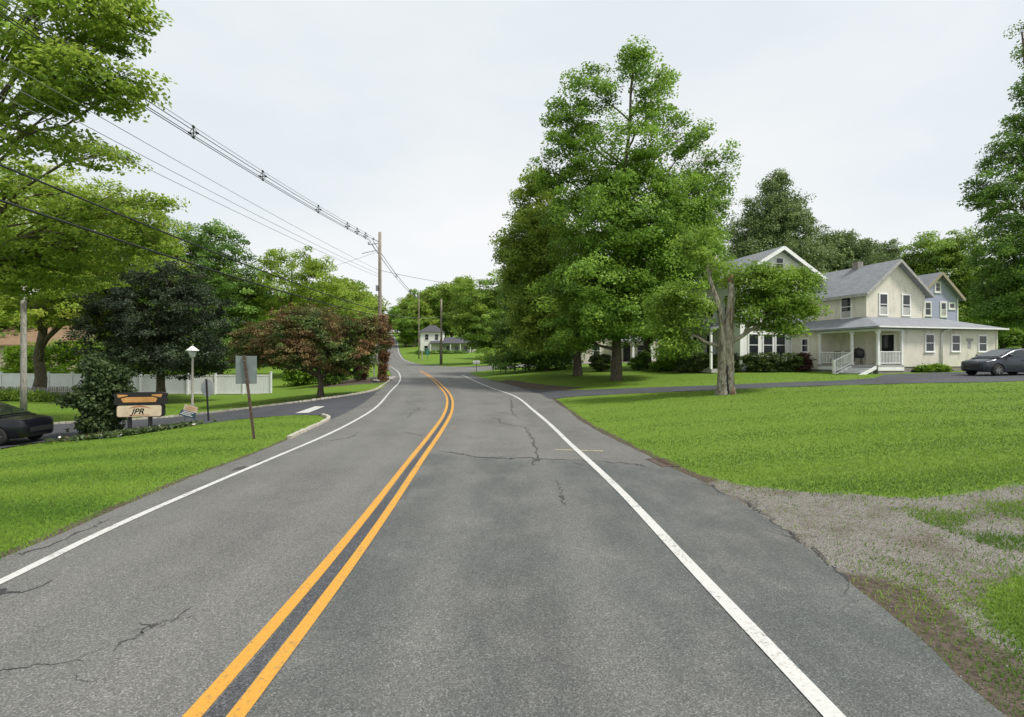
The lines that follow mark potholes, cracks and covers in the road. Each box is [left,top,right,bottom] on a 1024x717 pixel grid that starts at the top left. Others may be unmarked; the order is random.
crack [15,520,107,555]
crack [692,482,850,596]
crack [2,607,196,682]
crack [441,397,645,467]
